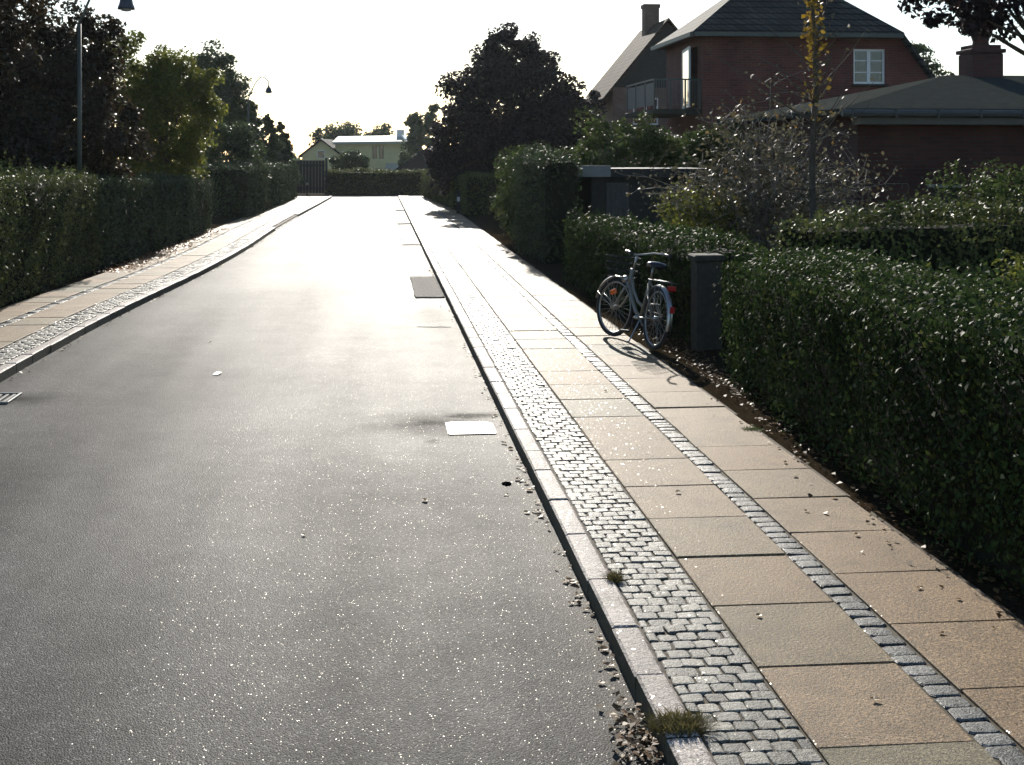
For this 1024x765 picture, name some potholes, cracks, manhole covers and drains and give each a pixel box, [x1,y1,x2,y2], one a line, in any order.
manhole cover [445,421,497,435]
